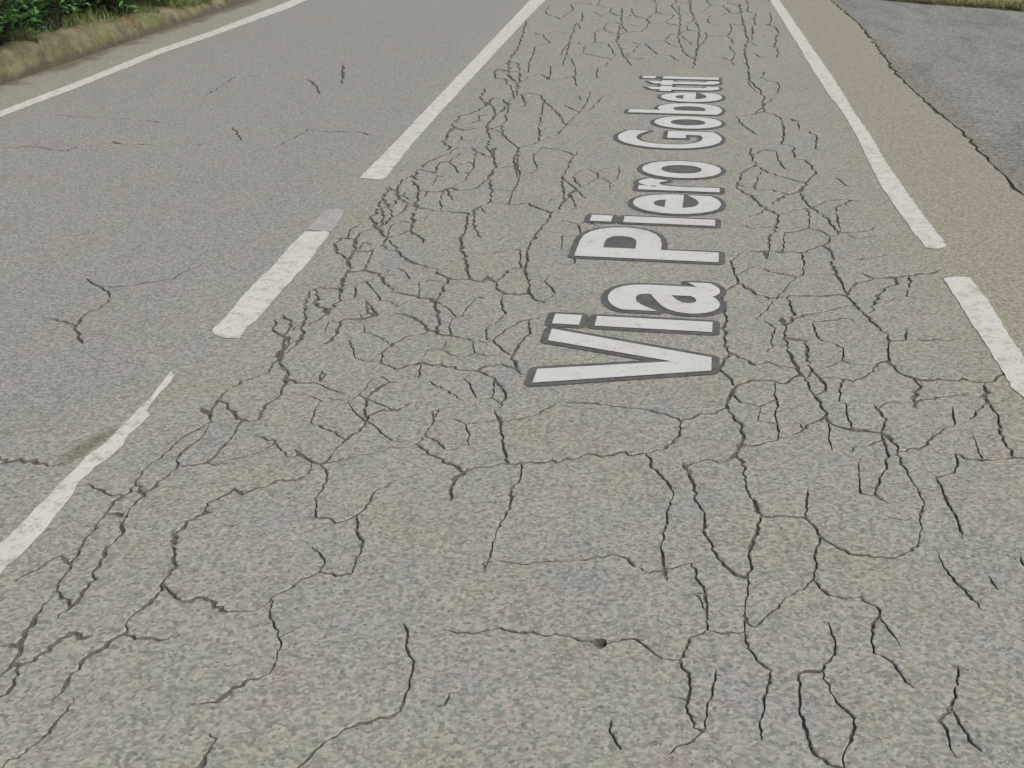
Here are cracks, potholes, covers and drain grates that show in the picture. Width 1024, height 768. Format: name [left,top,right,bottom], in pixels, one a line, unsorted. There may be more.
crack [606,720,622,750]
crack [273,129,376,147]
crack [936,549,983,610]
crack [0,446,93,467]
crack [205,75,257,96]
crack [56,114,164,123]
crack [675,0,702,69]
crack [937,666,983,759]
crack [614,8,632,66]
pothole [593,639,607,649]
crack [736,3,766,112]
crack [191,733,219,768]
